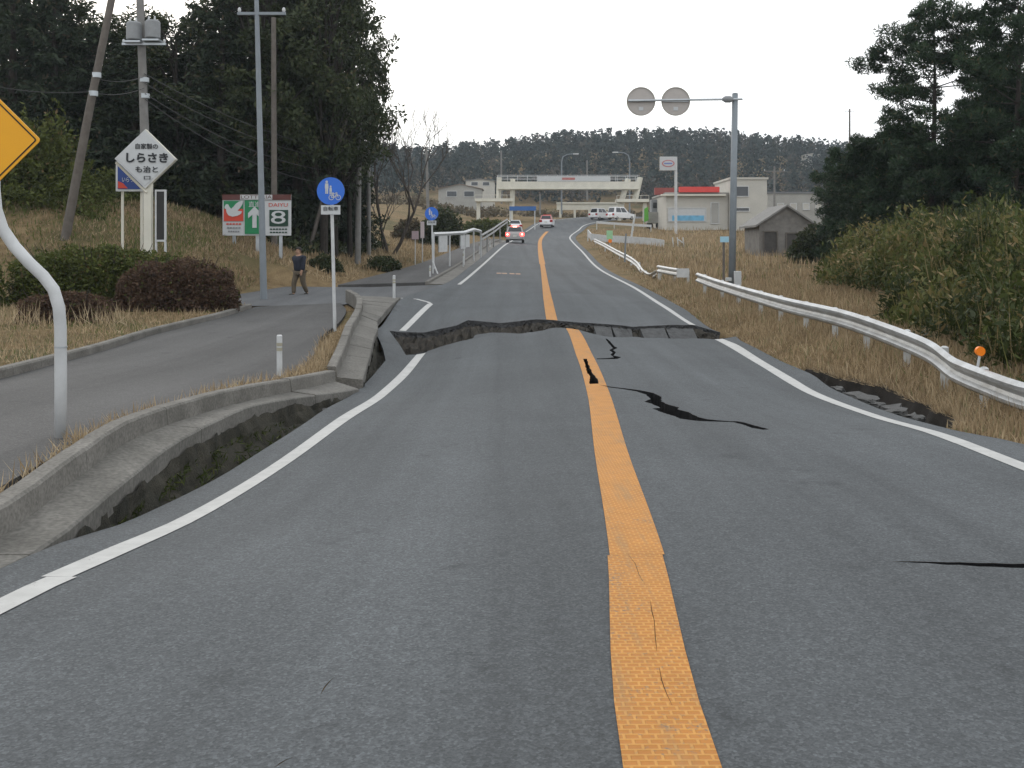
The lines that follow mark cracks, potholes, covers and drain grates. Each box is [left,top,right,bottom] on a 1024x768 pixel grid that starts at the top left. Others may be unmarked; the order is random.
crack [390,319,767,430]
